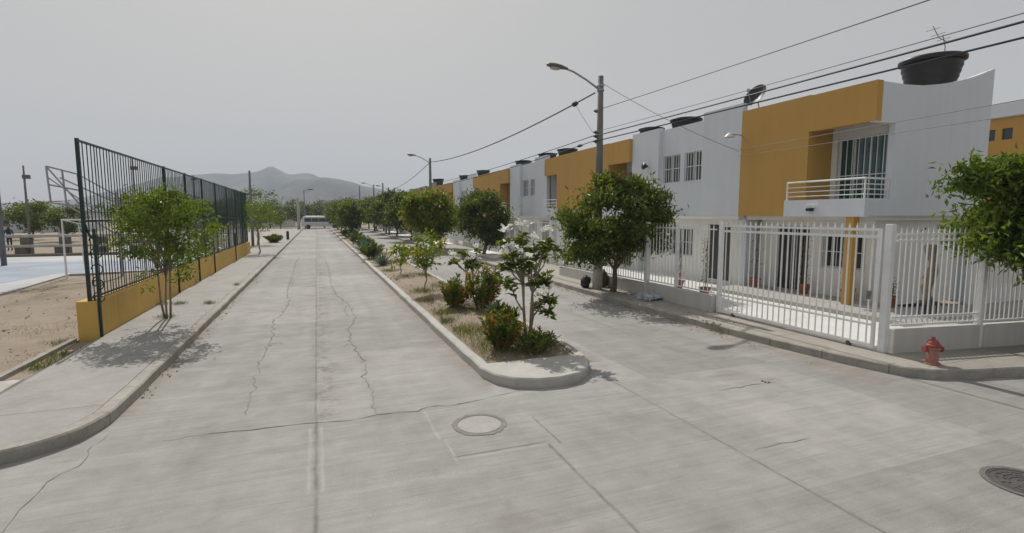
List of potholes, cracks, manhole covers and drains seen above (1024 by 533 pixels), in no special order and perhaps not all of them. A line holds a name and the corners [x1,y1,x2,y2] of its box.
manhole cover [452,413,507,436]
manhole cover [979,466,1024,497]
crack [175,262,512,440]
crack [2,432,112,532]
